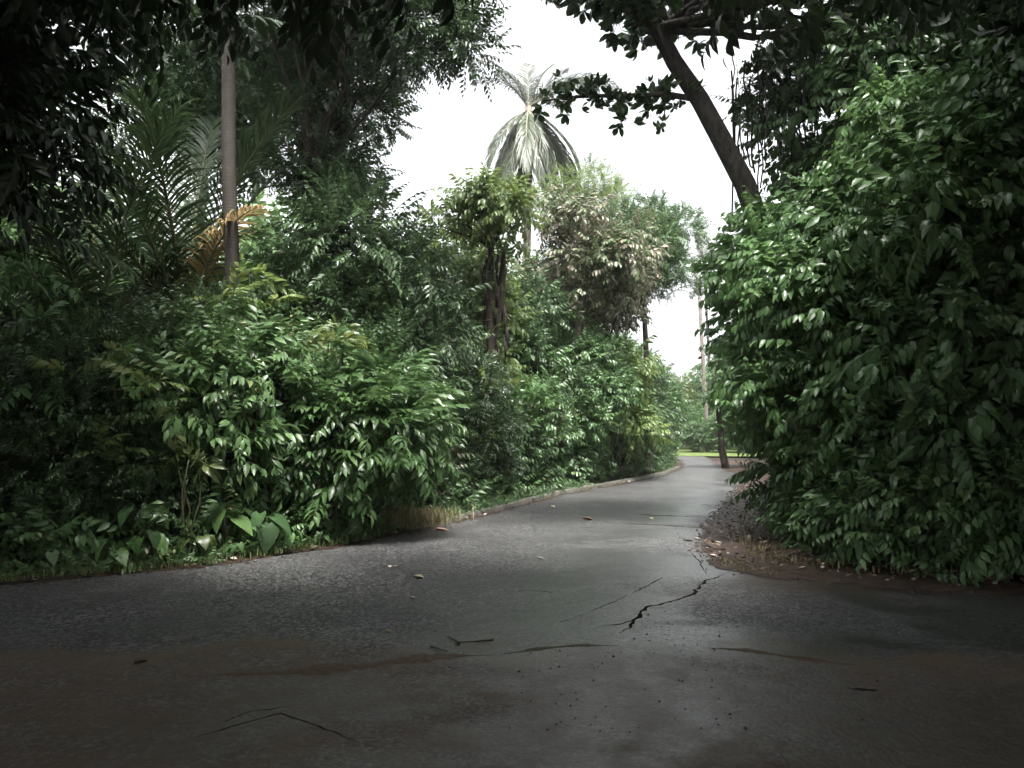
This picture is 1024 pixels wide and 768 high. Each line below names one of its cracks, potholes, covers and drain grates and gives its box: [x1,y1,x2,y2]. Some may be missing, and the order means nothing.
crack [200,707,359,742]
crack [559,553,723,633]
